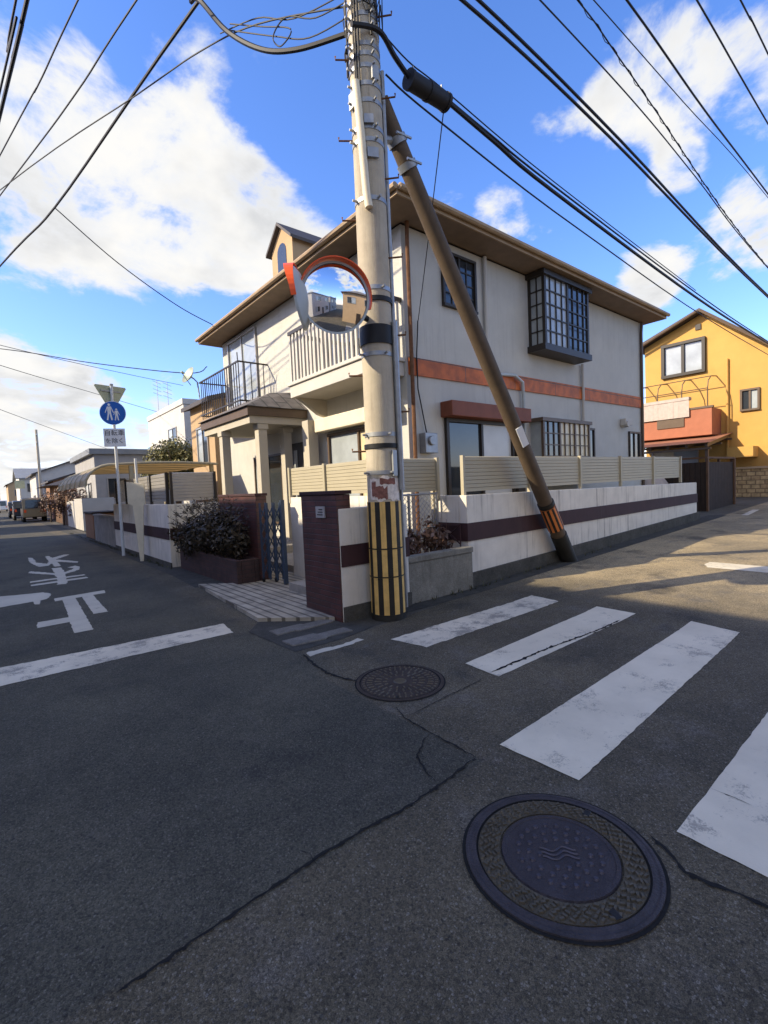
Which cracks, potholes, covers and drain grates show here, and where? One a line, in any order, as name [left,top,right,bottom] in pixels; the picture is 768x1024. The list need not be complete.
manhole cover [355,664,446,702]
manhole cover [462,793,671,946]
crack [492,620,619,672]
